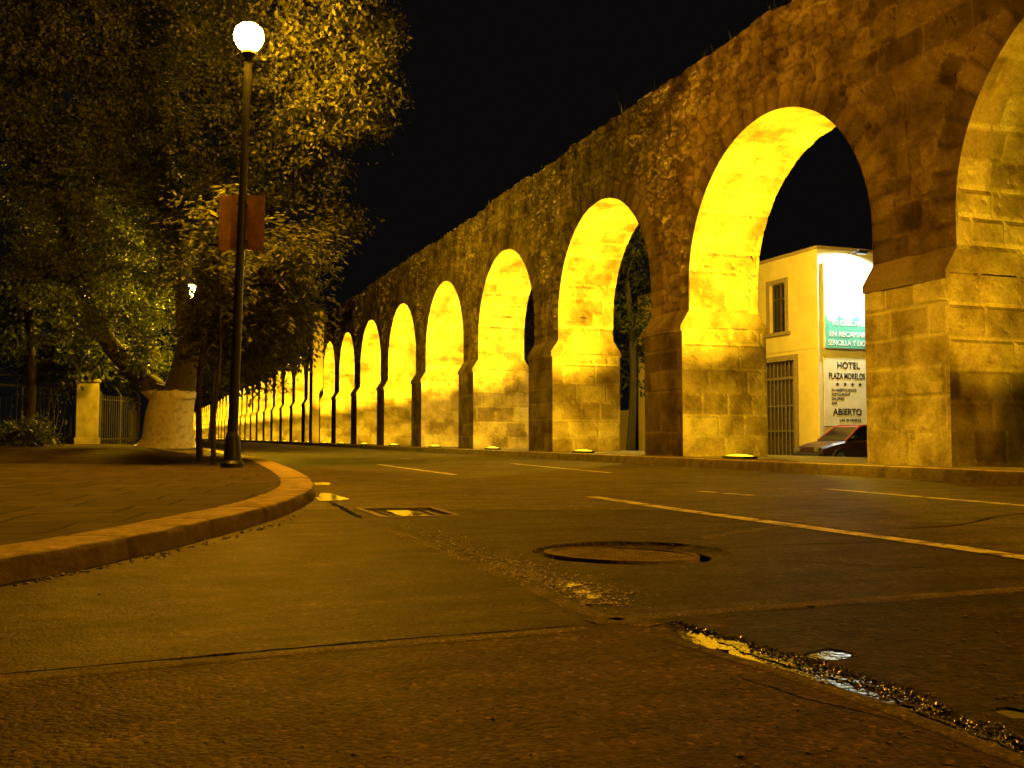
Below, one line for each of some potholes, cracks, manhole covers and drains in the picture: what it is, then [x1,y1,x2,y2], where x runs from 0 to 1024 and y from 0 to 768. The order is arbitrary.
manhole cover [532,541,732,565]
crack [890,513,1024,530]
pothole [663,621,1024,755]
